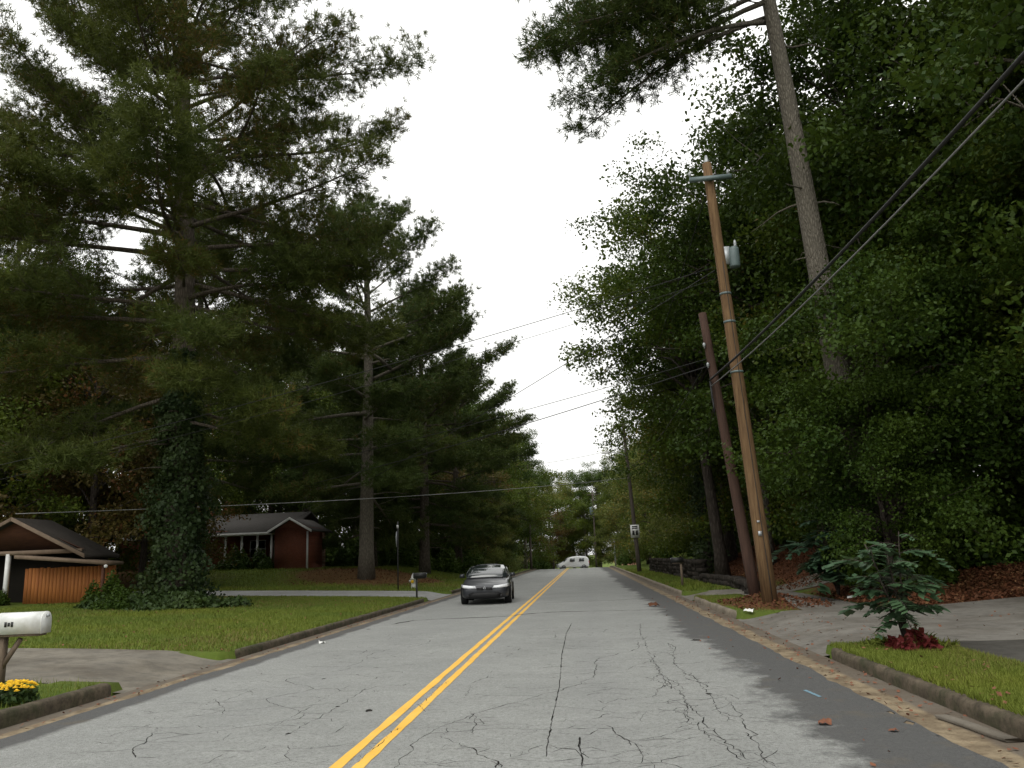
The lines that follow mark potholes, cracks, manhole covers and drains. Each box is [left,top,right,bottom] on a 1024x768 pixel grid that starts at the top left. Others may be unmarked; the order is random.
crack [76,625,788,768]
